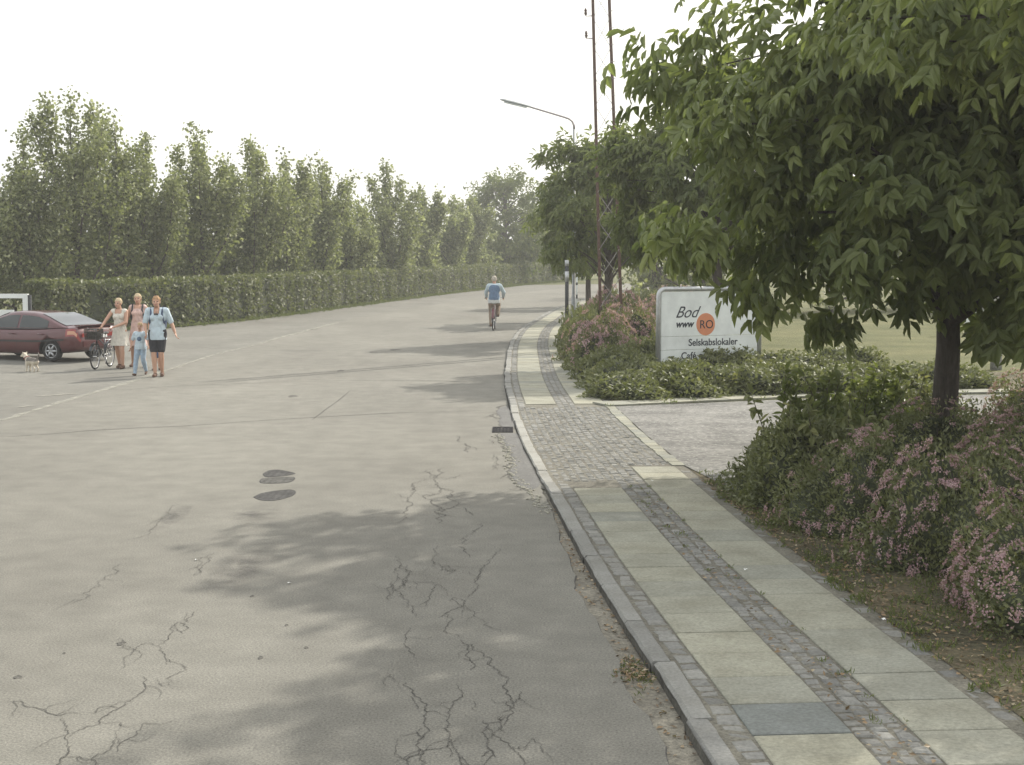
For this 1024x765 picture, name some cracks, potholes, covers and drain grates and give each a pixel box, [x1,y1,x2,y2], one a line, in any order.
crack [374,469,553,765]
crack [8,612,194,765]
